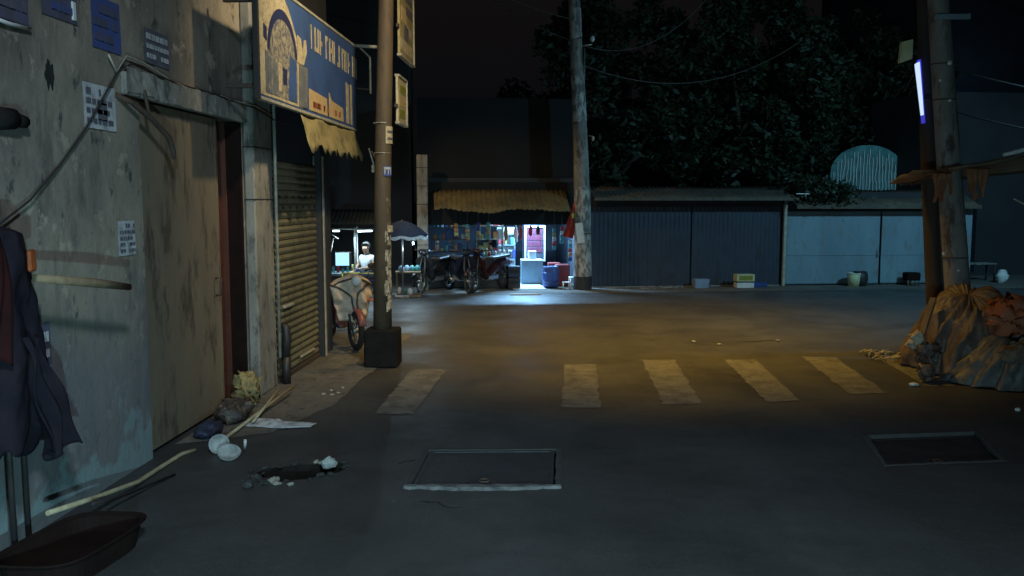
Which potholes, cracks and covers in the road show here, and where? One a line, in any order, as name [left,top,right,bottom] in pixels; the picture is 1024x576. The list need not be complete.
manhole cover [403,448,563,491]
manhole cover [861,431,1008,467]
pothole [240,461,350,485]
